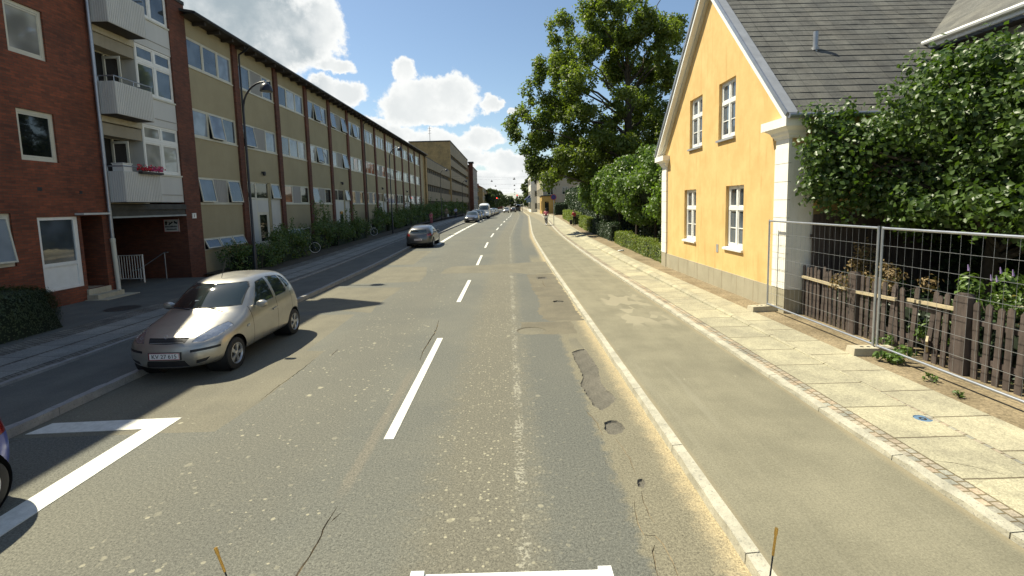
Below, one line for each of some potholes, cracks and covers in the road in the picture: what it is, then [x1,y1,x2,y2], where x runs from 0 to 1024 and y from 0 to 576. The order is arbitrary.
pothole [604,420,625,435]
manhole cover [517,327,546,335]
crack [295,506,341,576]
pothole [572,349,616,411]
crack [587,412,678,576]
